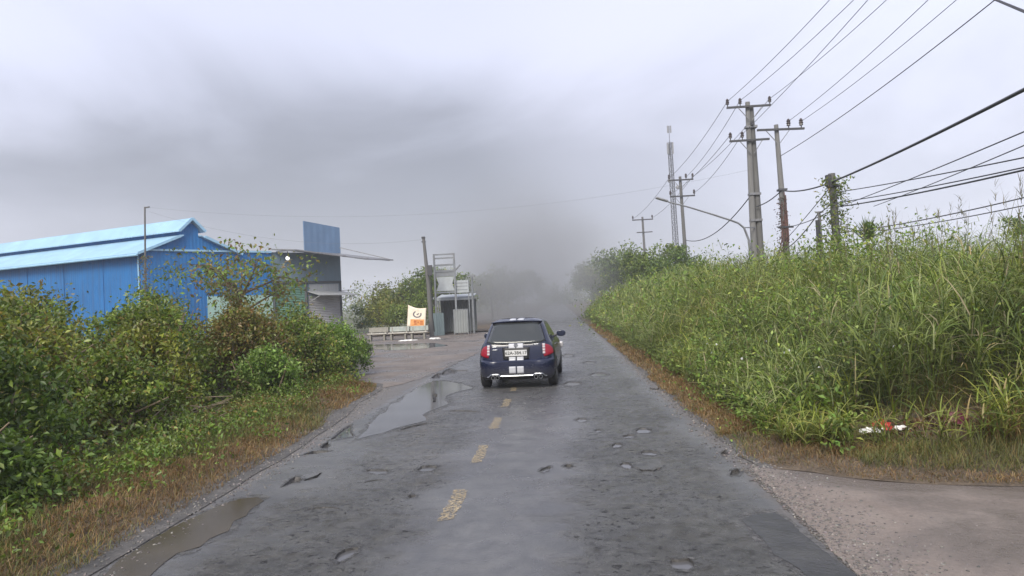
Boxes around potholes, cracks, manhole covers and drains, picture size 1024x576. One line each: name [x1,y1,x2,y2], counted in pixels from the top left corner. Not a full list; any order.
pothole [330,544,364,565]
pothole [280,475,306,487]
pothole [414,464,441,472]
pothole [664,555,700,572]
pothole [326,424,355,442]
